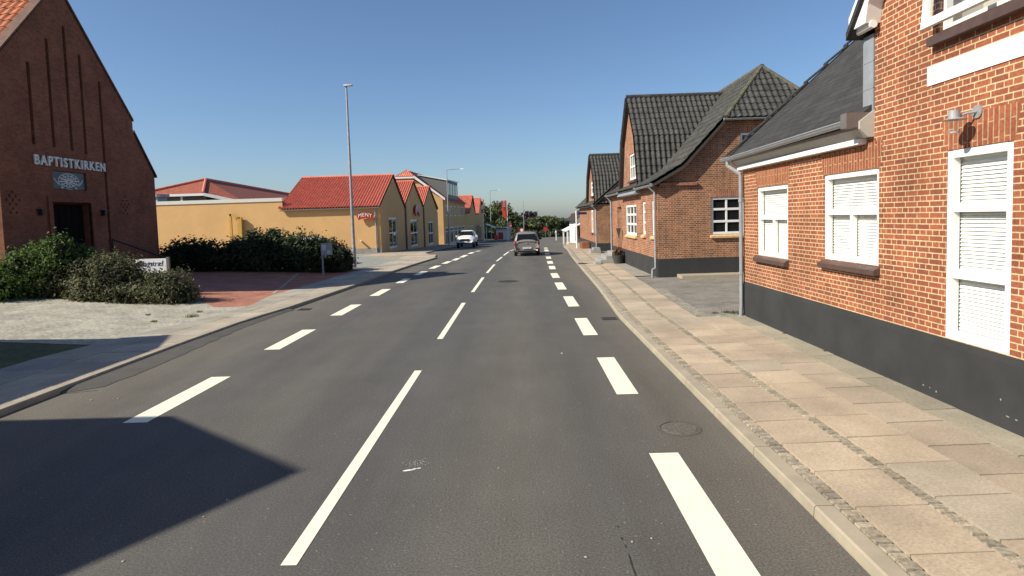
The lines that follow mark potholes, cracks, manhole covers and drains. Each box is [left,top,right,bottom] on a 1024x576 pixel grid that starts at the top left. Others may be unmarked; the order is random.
manhole cover [656,421,702,436]
